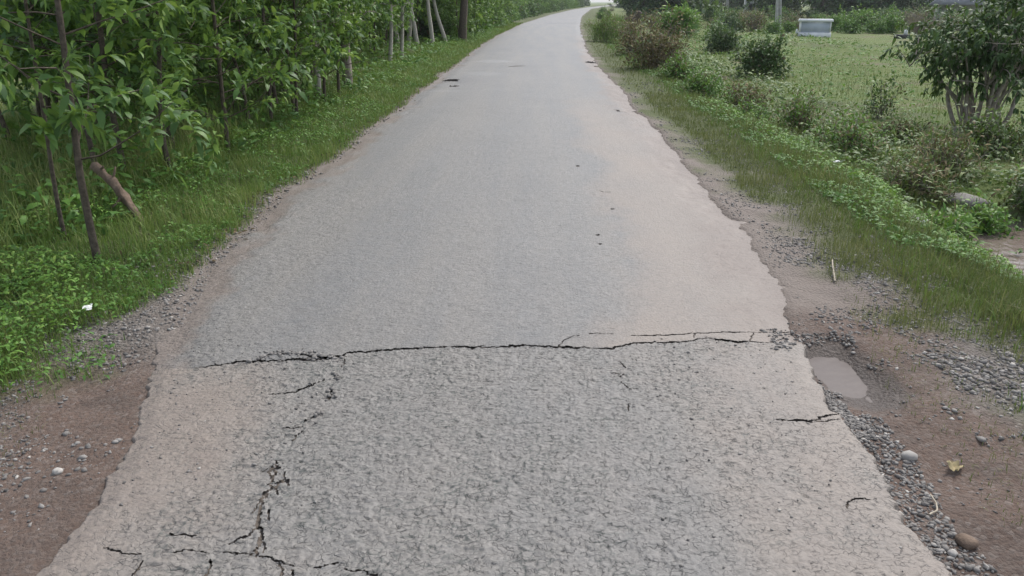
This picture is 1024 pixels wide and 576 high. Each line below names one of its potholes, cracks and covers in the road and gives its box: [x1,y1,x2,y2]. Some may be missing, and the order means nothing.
crack [781,415,833,423]
crack [107,332,776,576]
